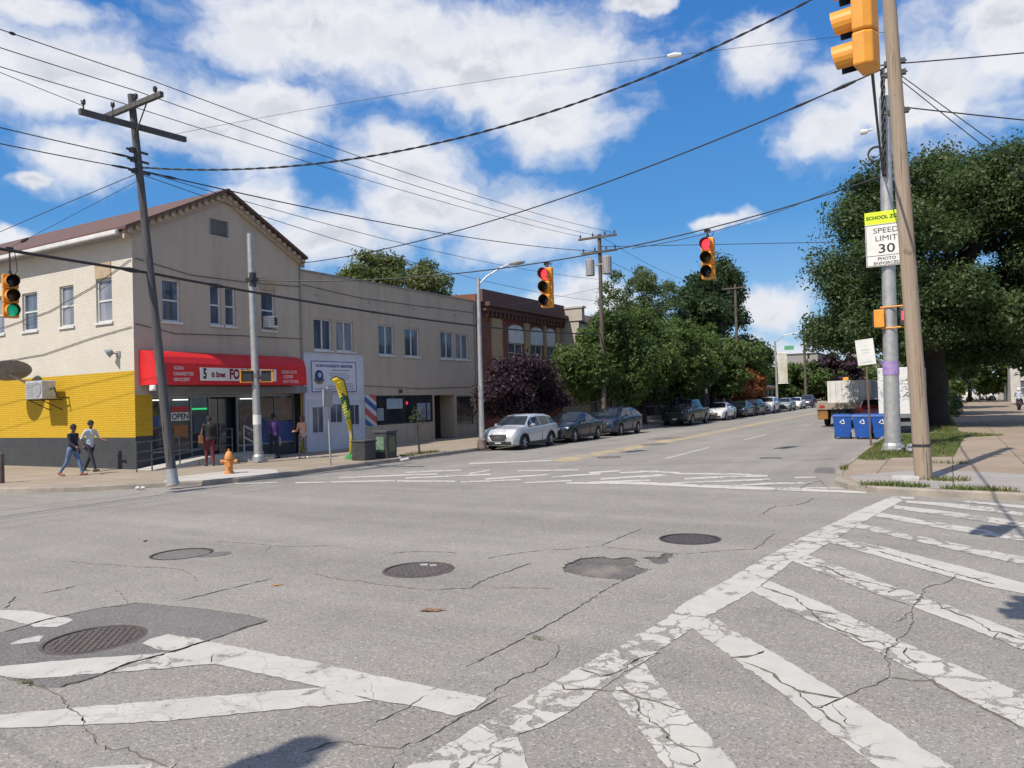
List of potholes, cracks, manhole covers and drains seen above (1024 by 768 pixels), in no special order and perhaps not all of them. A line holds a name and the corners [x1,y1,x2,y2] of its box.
manhole cover [659,533,721,545]
manhole cover [38,625,148,655]
manhole cover [382,562,455,578]
crack [303,529,775,768]
crack [72,561,273,601]
manhole cover [149,548,214,560]
